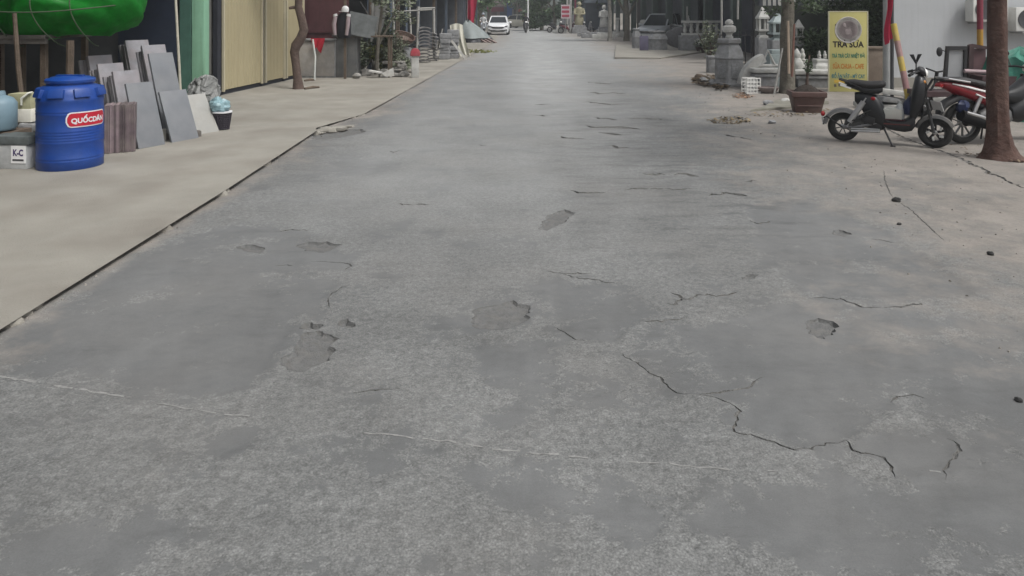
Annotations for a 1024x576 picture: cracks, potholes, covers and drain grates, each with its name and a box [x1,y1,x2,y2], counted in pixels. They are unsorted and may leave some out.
pothole [236,245,265,254]
pothole [538,209,574,231]
crack [561,82,662,149]
crack [641,292,737,323]
crack [883,173,941,238]
pothole [338,318,356,328]
crack [628,173,755,196]
pothole [471,300,530,330]
pothole [805,318,839,339]
pothole [296,241,342,253]
pothole [281,330,339,372]
crack [942,438,963,476]
